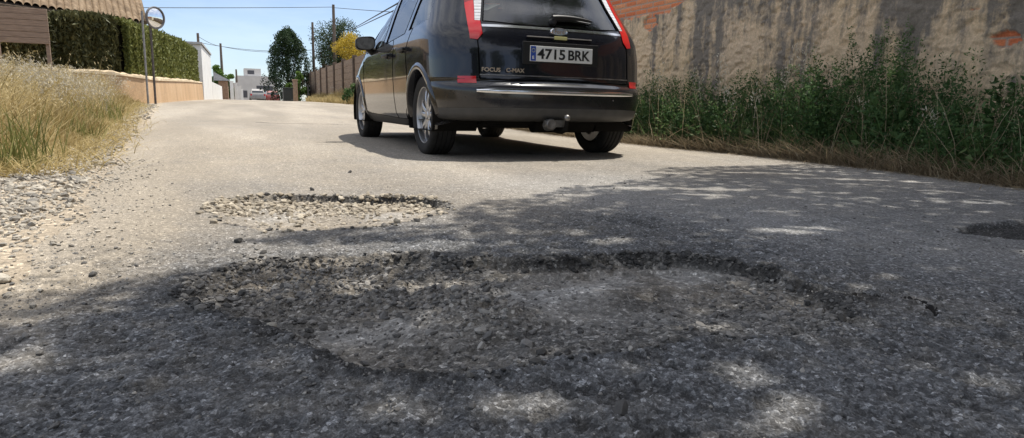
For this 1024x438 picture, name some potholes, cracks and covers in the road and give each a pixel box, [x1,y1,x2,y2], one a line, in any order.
pothole [956,220,1024,240]
pothole [166,249,868,378]
pothole [195,191,456,233]
